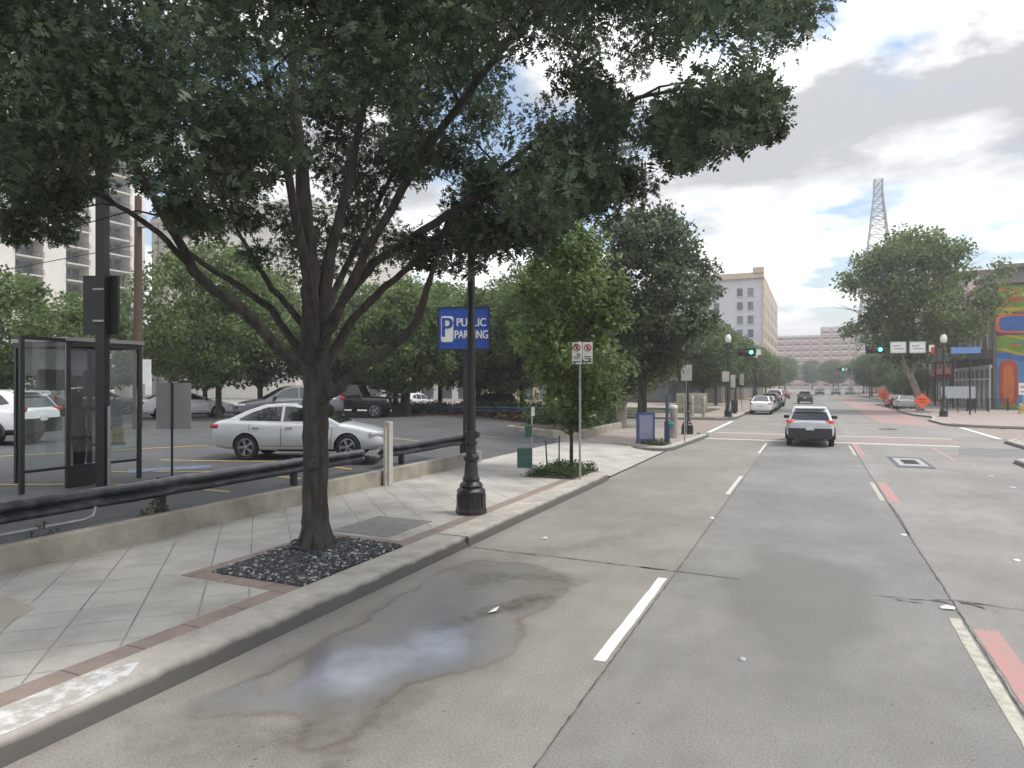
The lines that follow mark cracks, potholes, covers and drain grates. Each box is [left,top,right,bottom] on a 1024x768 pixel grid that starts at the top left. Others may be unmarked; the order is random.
manhole cover [887,456,937,469]
crack [468,546,737,579]
crack [851,445,1024,715]
